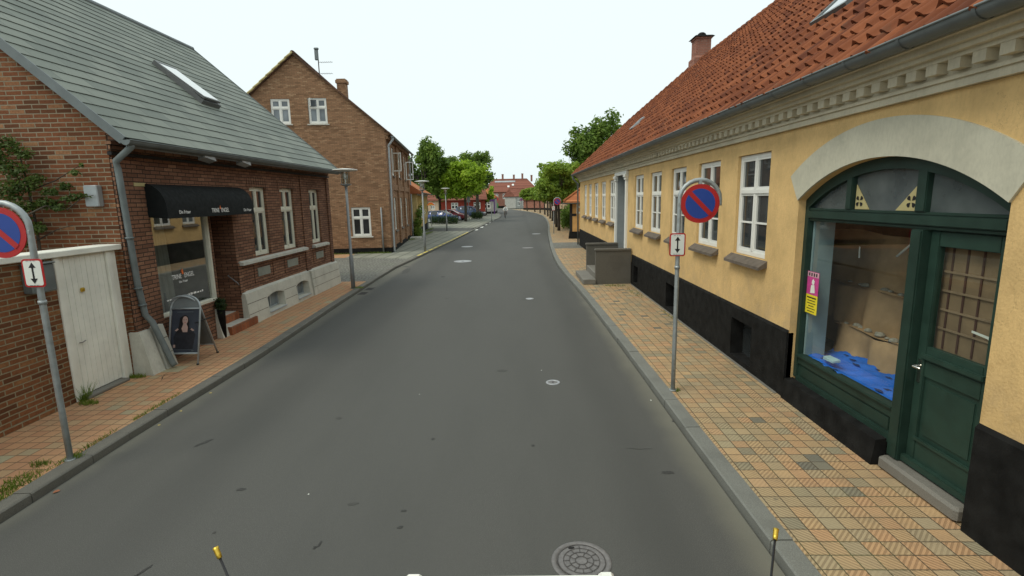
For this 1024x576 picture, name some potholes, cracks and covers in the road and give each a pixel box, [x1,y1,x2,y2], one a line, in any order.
manhole cover [551,541,612,576]
